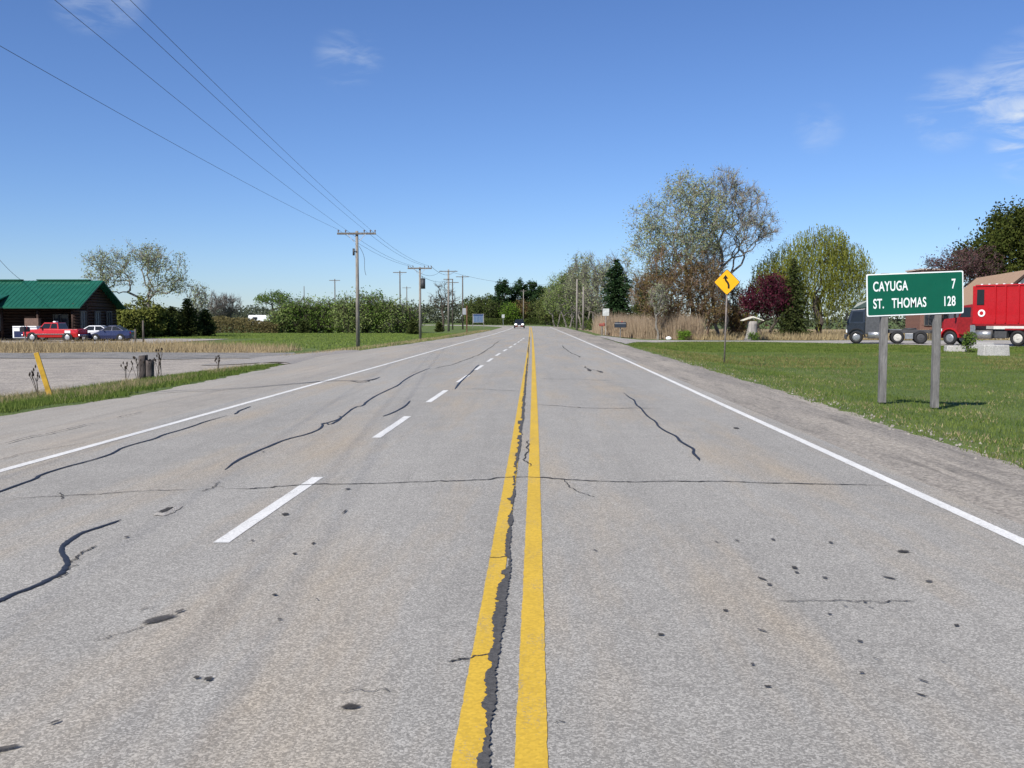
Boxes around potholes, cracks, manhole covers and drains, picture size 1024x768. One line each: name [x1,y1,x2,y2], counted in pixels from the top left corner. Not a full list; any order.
crack [57,545,96,578]
crack [25,481,223,499]
pothole [154,506,182,516]
